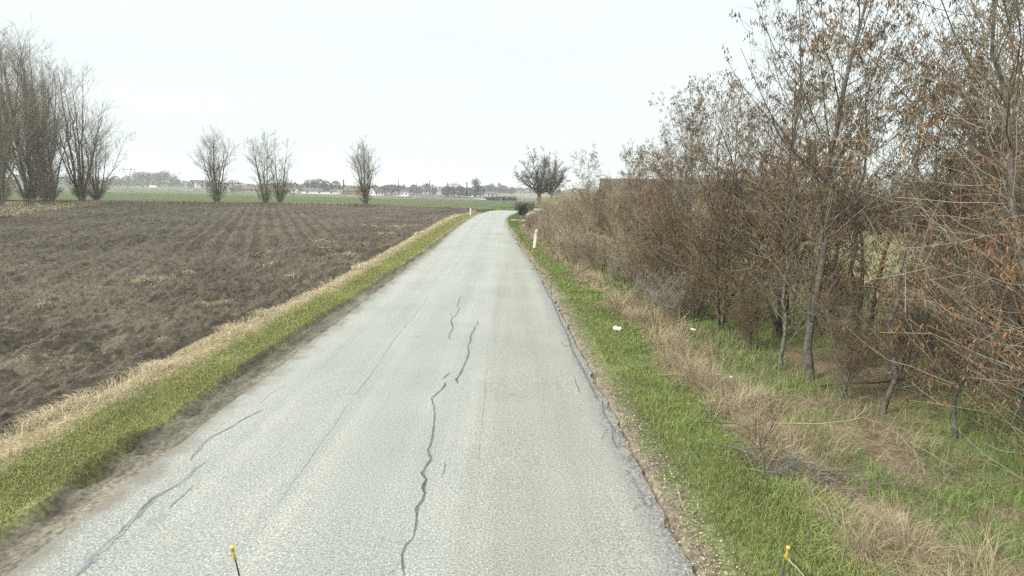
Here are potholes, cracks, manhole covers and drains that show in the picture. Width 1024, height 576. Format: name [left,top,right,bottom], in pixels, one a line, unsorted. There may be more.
crack [390,298,487,574]
